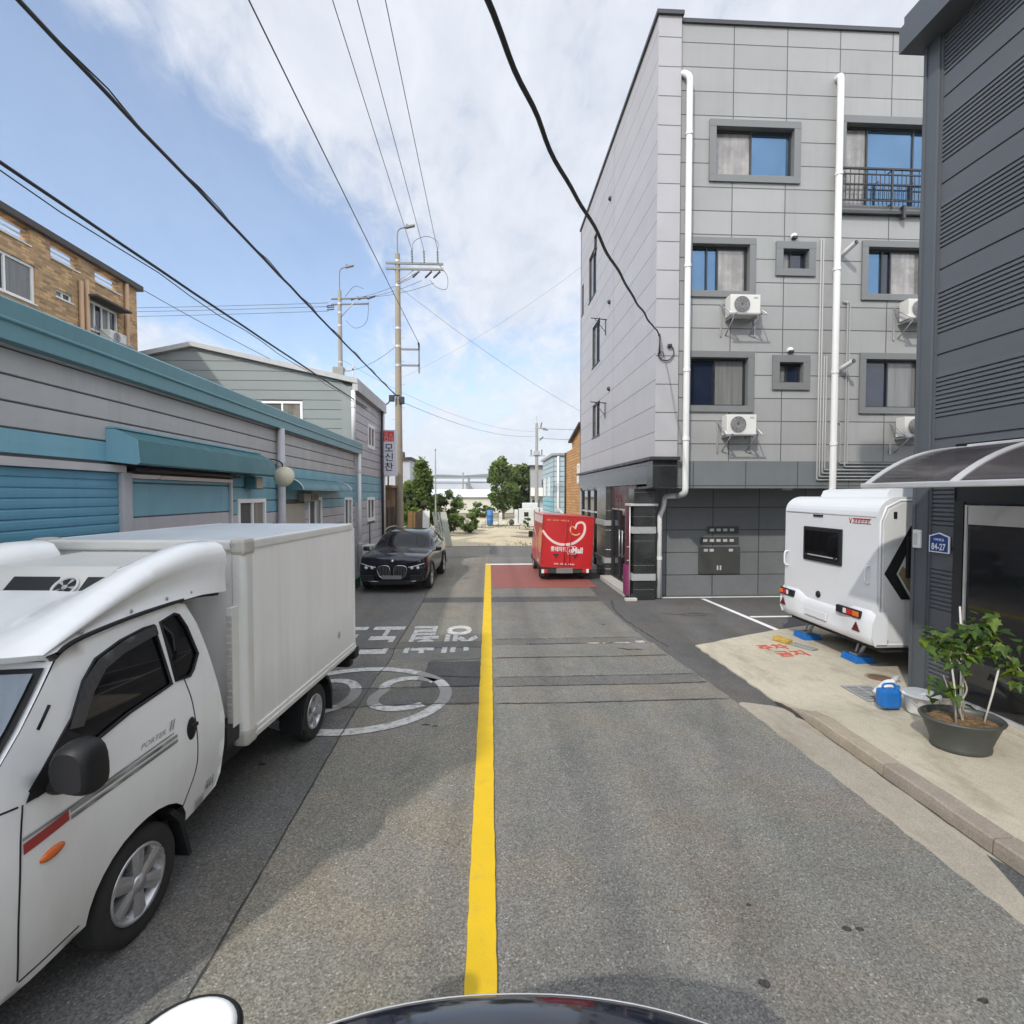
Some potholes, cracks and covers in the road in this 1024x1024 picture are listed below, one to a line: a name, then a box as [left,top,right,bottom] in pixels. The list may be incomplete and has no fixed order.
manhole cover [864,673,892,682]
drain grate [841,685,876,701]
